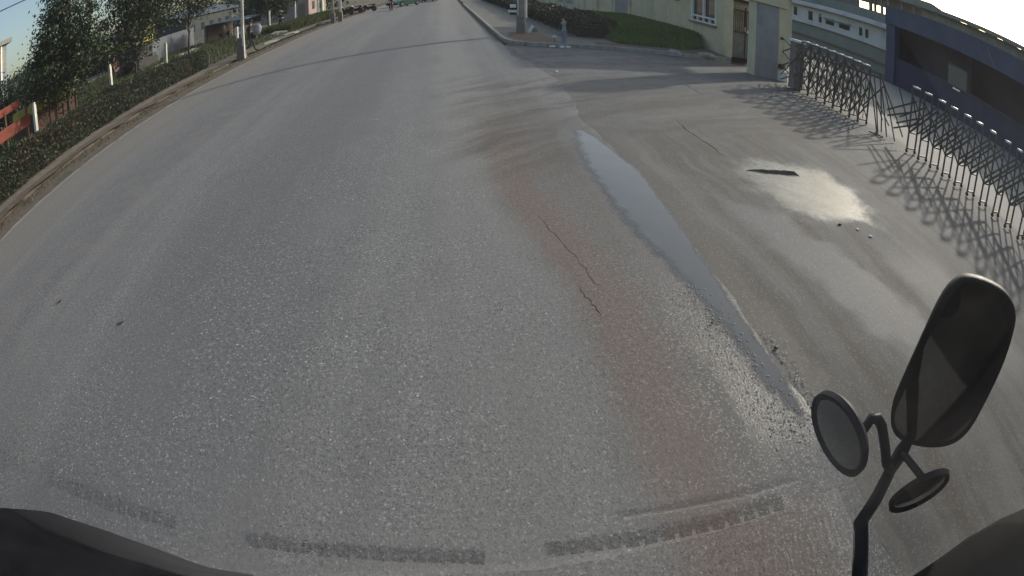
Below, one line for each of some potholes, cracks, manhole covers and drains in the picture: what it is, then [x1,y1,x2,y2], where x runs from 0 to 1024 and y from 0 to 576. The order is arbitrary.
pothole [746,169,800,177]
crack [540,218,605,316]
